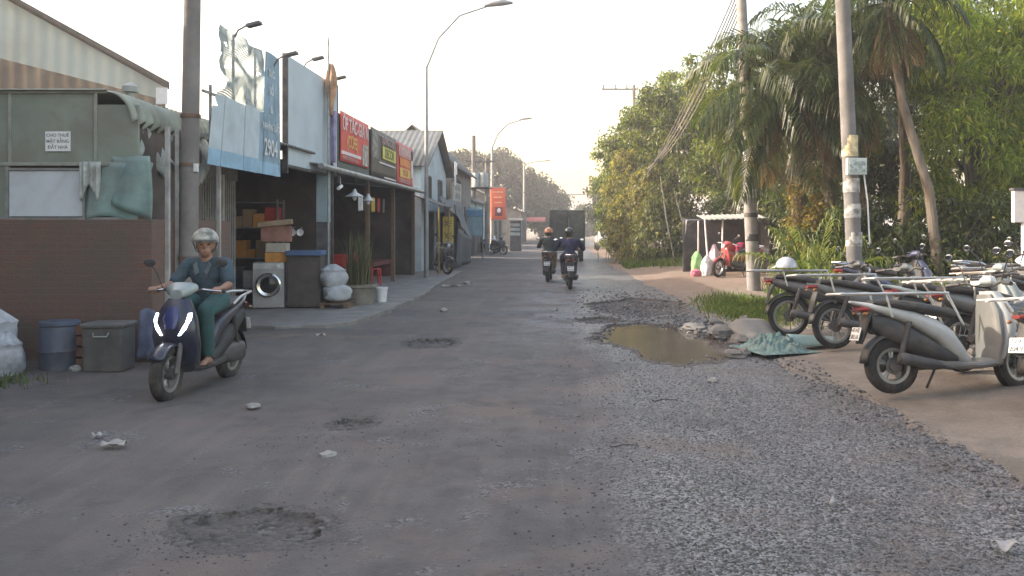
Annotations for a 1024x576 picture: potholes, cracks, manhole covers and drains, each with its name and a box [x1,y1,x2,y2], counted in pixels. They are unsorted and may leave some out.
pothole [321,417,383,431]
pothole [158,503,348,557]
pothole [399,338,463,349]
pothole [584,322,754,367]
pothole [583,298,693,317]
